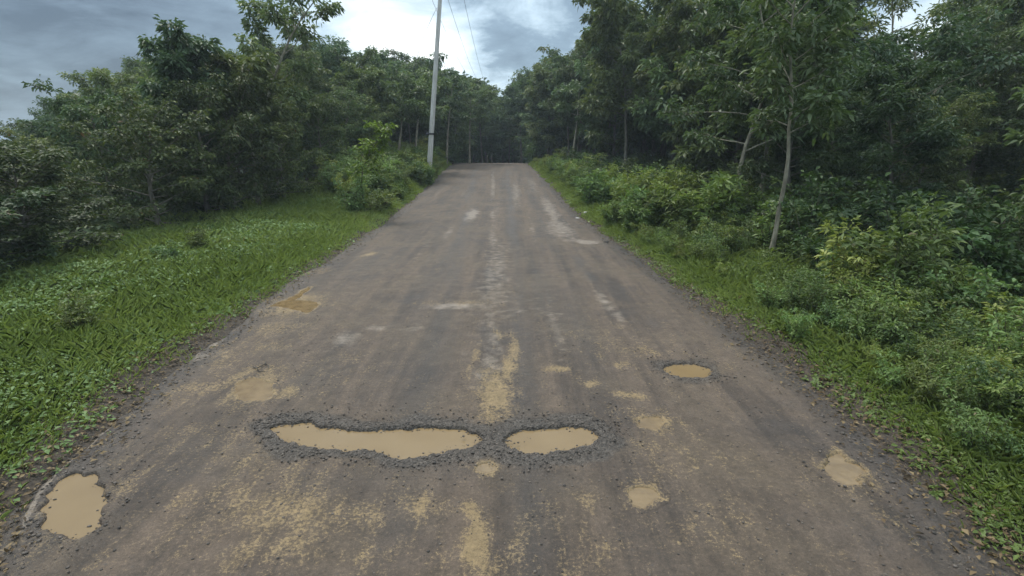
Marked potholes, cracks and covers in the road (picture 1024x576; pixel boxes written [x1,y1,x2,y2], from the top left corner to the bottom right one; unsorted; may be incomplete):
pothole [265,285,327,315]
pothole [254,415,493,466]
pothole [613,475,671,513]
pothole [19,463,126,550]
pothole [466,456,507,479]
pothole [654,359,721,382]
pothole [482,419,612,463]
pothole [629,412,671,433]
pothole [807,444,883,492]
pothole [222,375,282,406]
